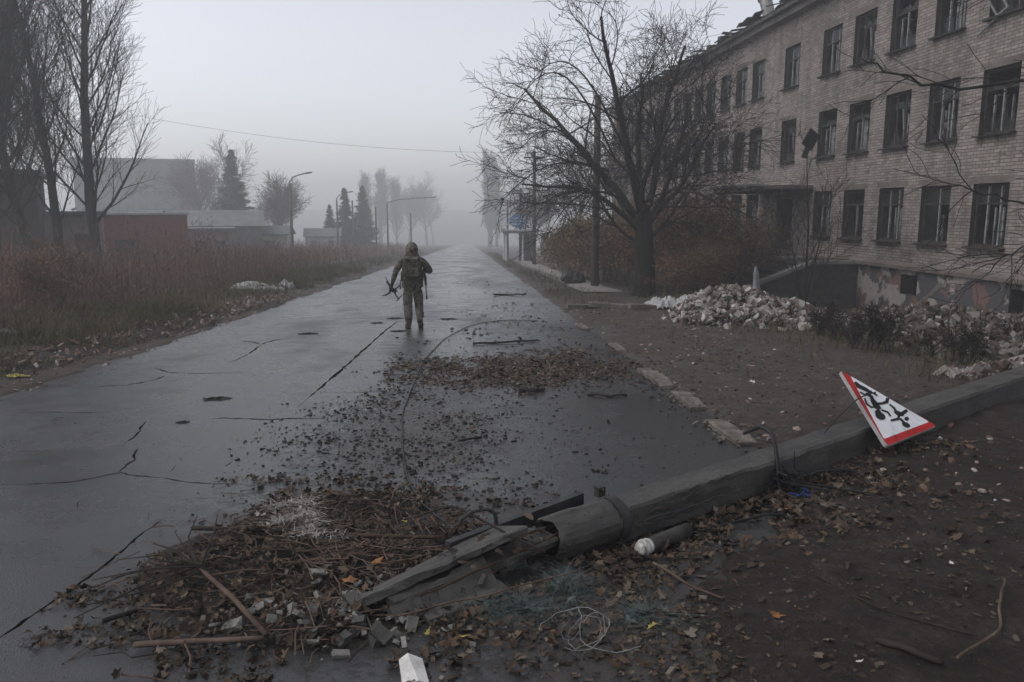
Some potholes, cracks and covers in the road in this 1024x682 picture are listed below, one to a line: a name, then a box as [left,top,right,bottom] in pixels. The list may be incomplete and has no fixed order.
crack [0,422,244,485]
crack [98,338,288,387]
